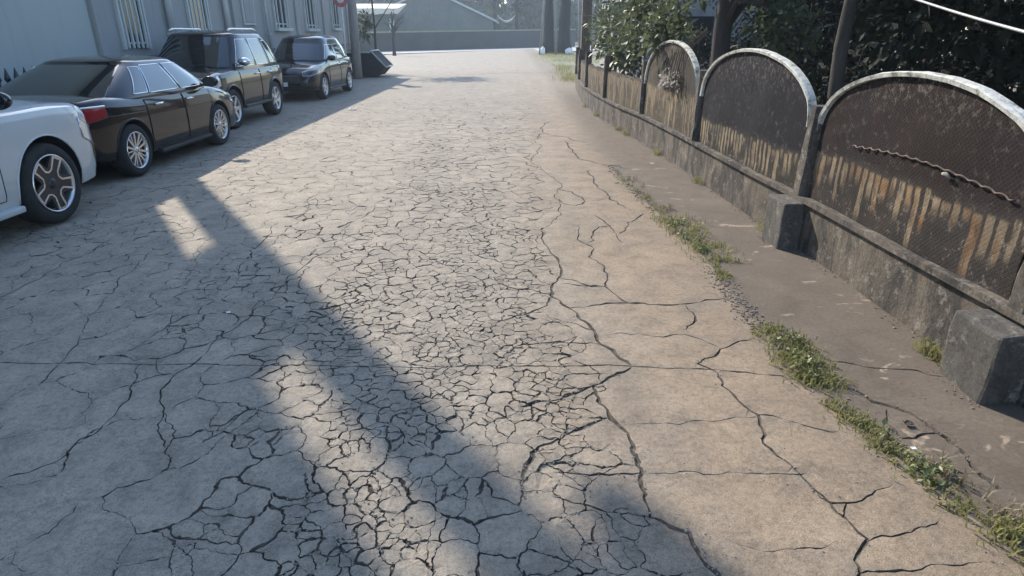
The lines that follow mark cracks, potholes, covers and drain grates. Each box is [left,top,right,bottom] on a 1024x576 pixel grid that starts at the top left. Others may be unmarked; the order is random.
crack [563,226,627,303]
crack [697,340,1012,546]
crack [596,213,644,243]
crack [608,333,719,348]
crack [565,141,625,169]
crack [643,417,752,425]
crack [587,170,626,208]
crack [572,298,725,329]
